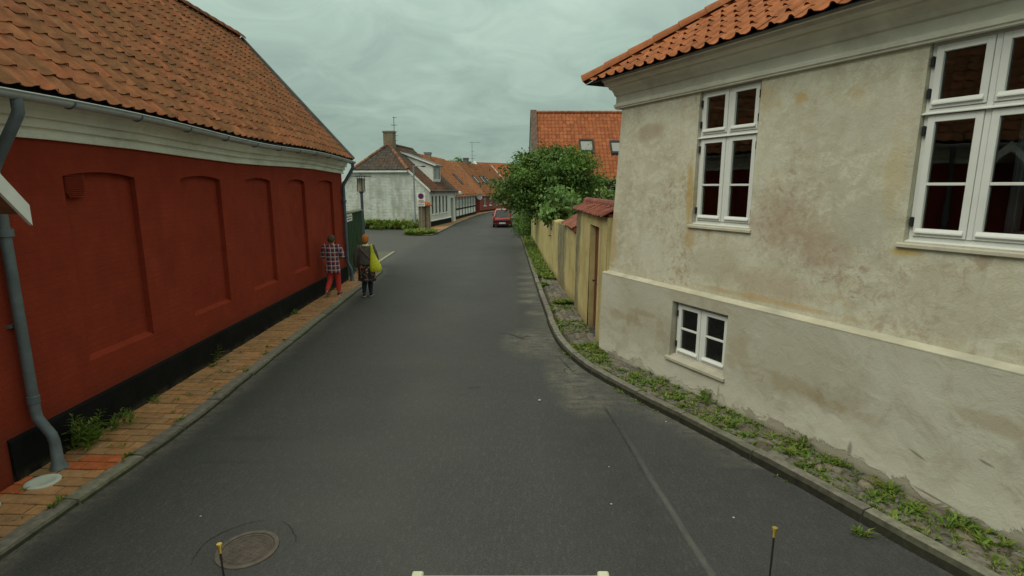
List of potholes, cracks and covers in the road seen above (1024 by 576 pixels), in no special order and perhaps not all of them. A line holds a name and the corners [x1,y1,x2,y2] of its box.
manhole cover [214,530,279,570]
crack [190,519,296,565]
